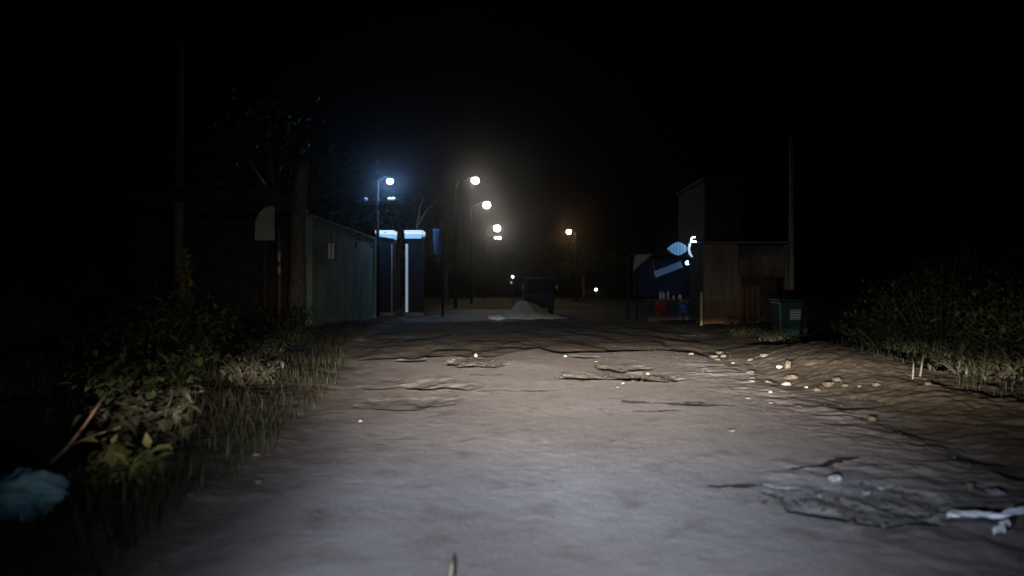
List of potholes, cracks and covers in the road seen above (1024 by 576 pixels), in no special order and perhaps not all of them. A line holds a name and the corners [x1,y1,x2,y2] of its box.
pothole [348,392,465,411]
pothole [352,374,485,391]
pothole [736,473,987,528]
pothole [442,356,508,368]
crack [790,456,861,470]
pothole [581,363,656,372]
pothole [554,368,691,383]
crack [622,400,736,412]
